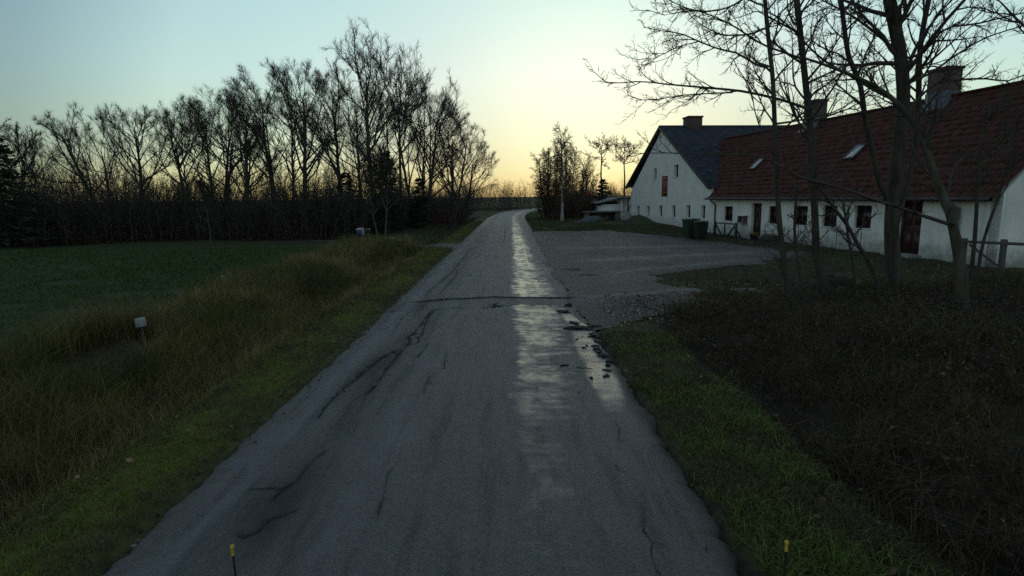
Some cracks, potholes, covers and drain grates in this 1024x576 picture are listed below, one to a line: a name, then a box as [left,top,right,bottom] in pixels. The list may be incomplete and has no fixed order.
crack [240,450,326,539]
crack [319,252,562,418]
